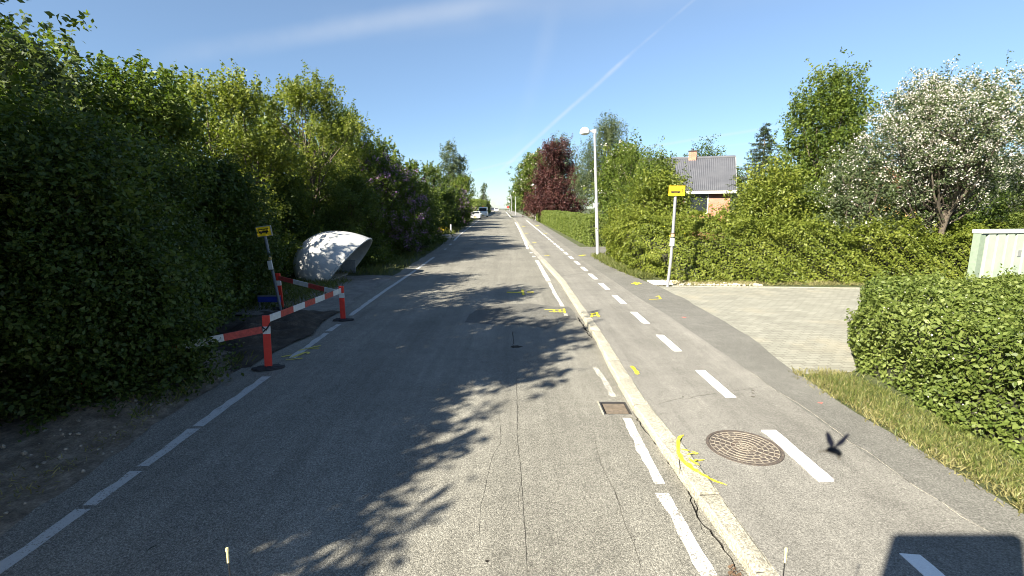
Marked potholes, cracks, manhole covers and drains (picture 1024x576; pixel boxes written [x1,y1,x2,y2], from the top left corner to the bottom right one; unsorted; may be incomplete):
manhole cover [706,430,785,466]
crack [633,413,735,567]
crack [478,373,528,575]
drain grate [597,401,632,415]
crack [594,437,642,571]
